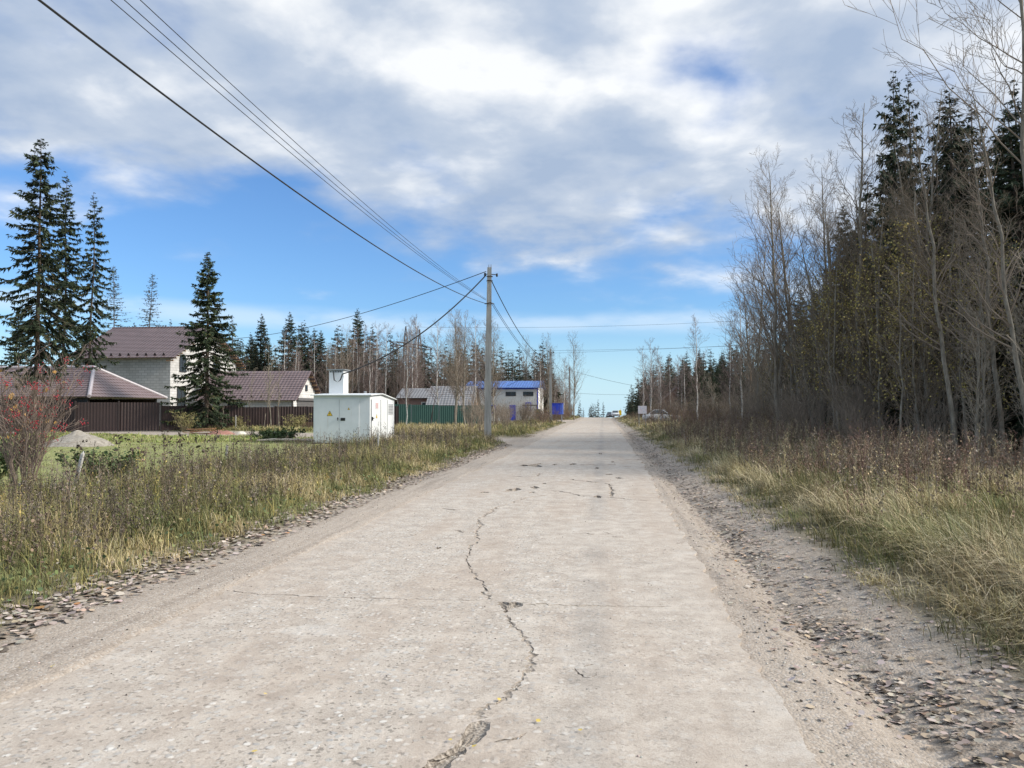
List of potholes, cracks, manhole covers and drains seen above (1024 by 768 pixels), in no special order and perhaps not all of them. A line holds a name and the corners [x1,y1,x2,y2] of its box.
pothole [421,721,491,768]
crack [441,479,647,742]
